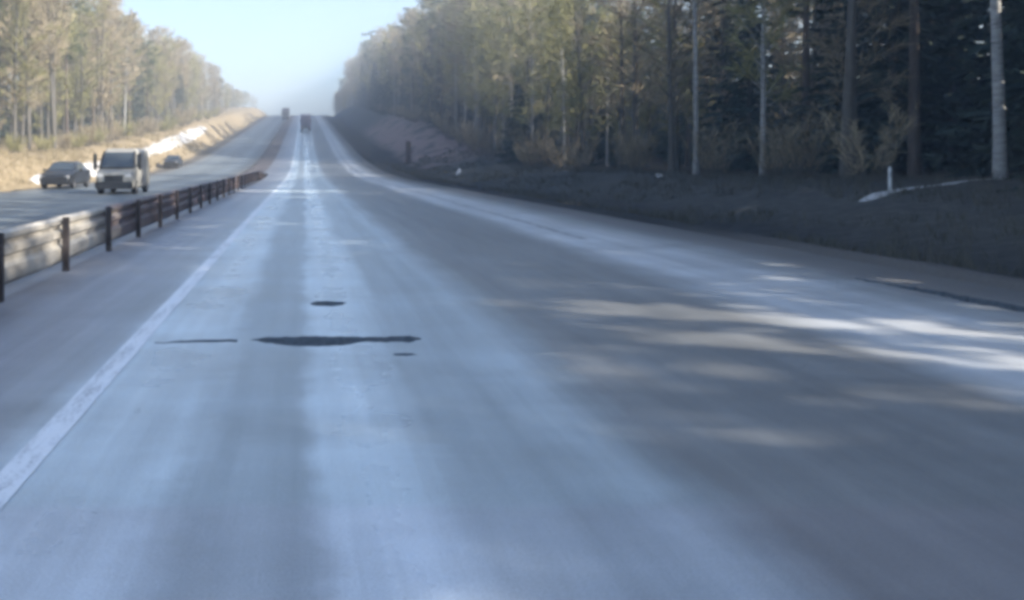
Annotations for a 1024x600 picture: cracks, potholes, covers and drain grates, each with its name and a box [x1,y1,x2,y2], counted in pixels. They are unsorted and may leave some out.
pothole [252,336,422,346]
